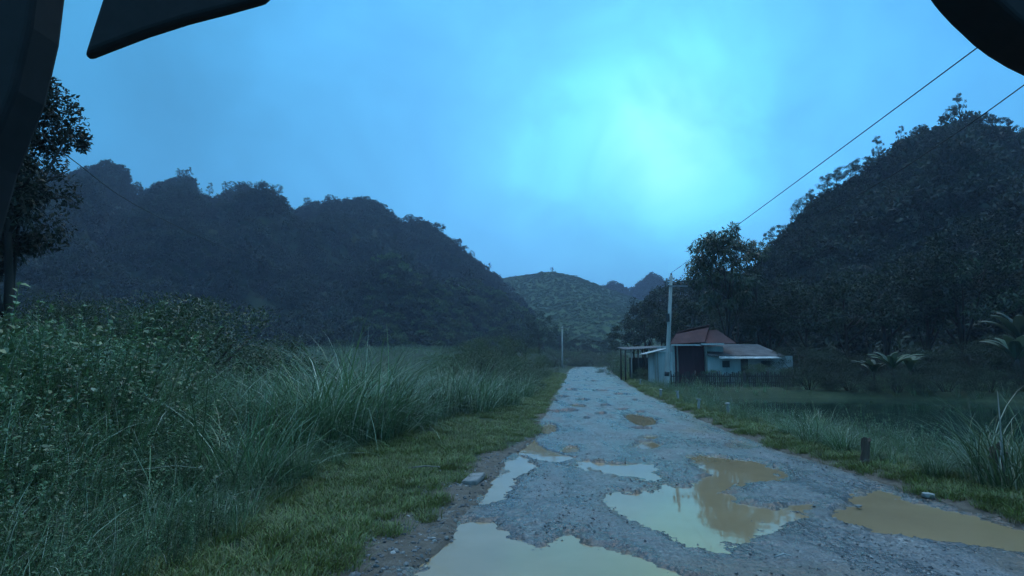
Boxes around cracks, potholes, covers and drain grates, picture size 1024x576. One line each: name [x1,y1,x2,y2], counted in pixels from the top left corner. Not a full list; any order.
pothole [824,484,1024,554]
pothole [472,453,546,507]
pothole [622,413,661,427]
pothole [402,513,710,576]
pothole [626,439,667,450]
pothole [567,452,823,556]
pothole [517,439,581,463]
